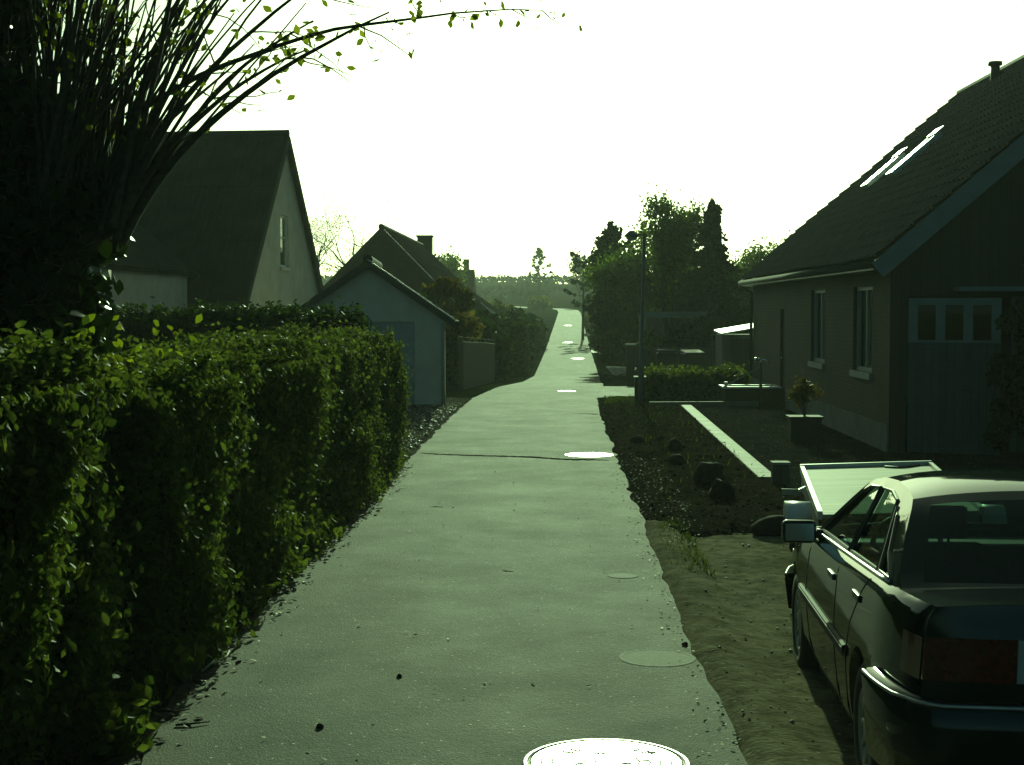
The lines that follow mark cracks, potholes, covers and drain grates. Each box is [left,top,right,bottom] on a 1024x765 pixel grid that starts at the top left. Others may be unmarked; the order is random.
manhole cover [618,649,697,667]
manhole cover [522,739,691,765]
